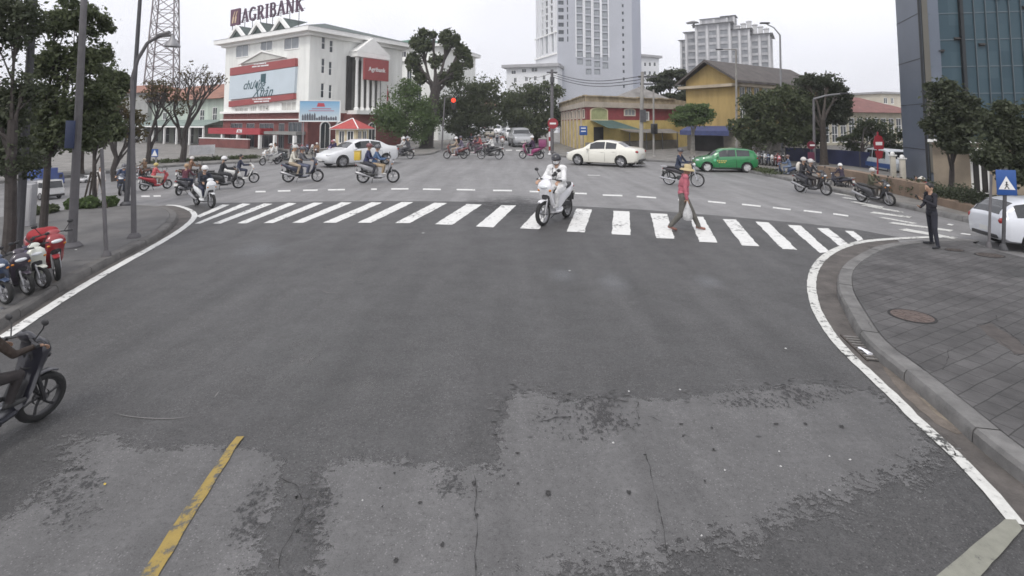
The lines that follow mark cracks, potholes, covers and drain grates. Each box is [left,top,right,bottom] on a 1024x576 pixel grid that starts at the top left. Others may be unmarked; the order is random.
crack [278,477,305,569]
drain grate [840,334,879,362]
manhole cover [887,308,938,324]
